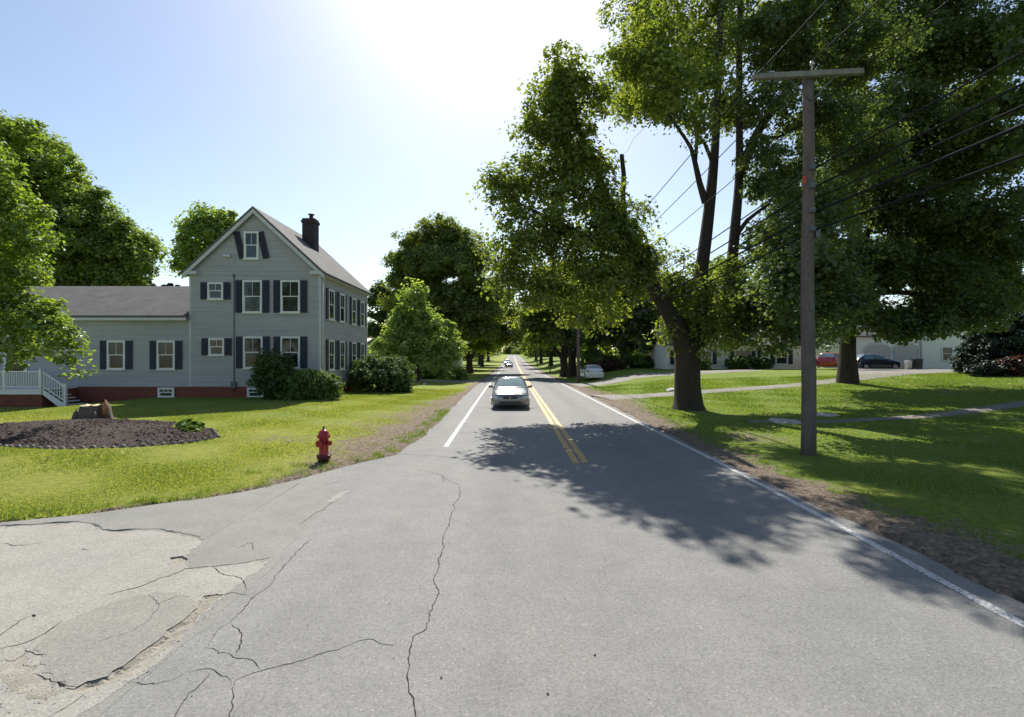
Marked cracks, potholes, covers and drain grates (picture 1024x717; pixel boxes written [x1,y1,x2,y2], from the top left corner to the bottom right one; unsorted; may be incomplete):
crack [406,470,460,717]
crack [95,542,389,717]
crack [0,612,84,709]
pothole [68,595,222,693]
